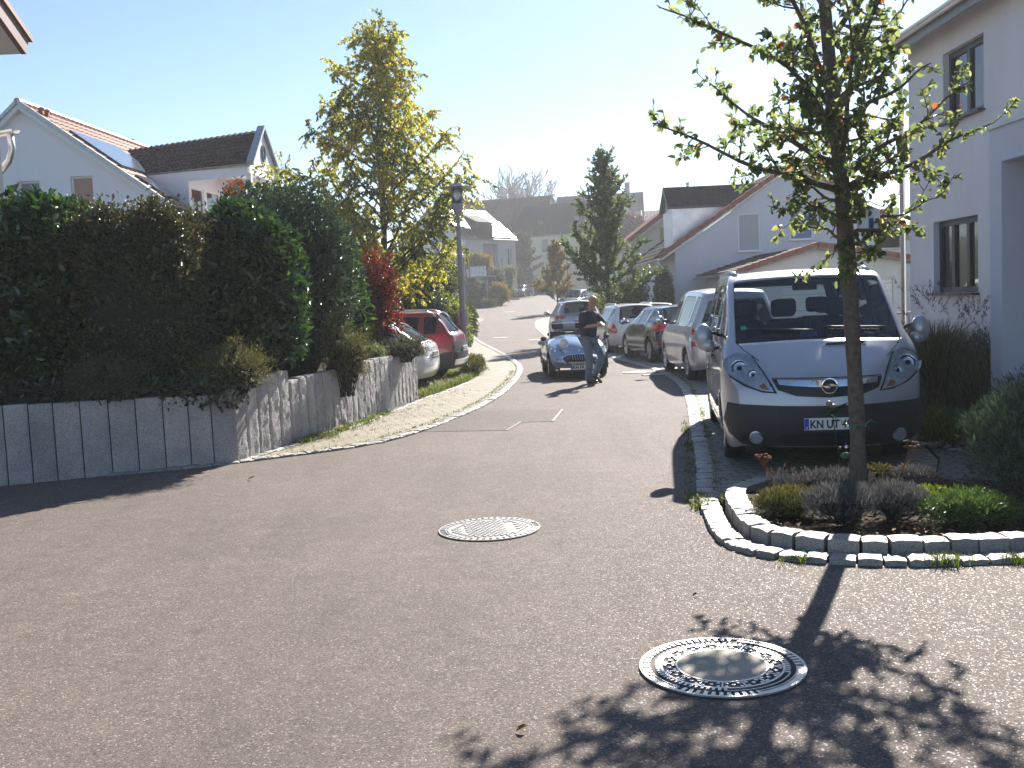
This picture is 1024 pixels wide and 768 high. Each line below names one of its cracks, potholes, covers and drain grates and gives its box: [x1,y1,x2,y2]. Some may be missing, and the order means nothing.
manhole cover [439,517,540,541]
manhole cover [639,637,807,698]
